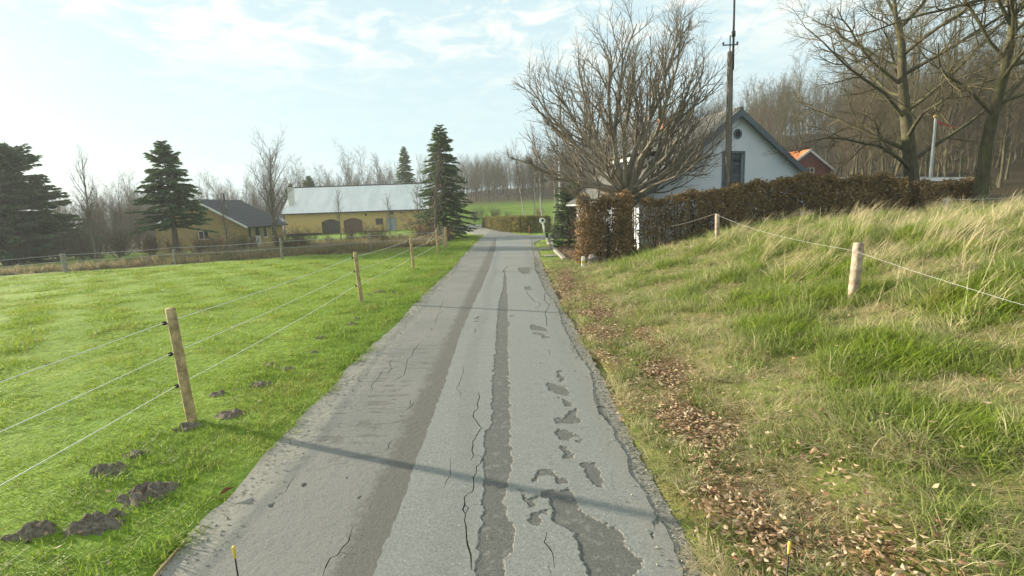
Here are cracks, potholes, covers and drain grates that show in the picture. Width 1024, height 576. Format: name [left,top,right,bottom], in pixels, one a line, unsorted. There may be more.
crack [445,368,482,569]
pothole [540,487,645,576]
pothole [545,382,571,396]
pothole [516,488,540,508]
pothole [579,462,605,488]
pothole [553,408,582,424]
pothole [559,445,575,461]
pothole [526,509,550,526]
pothole [554,428,582,441]
